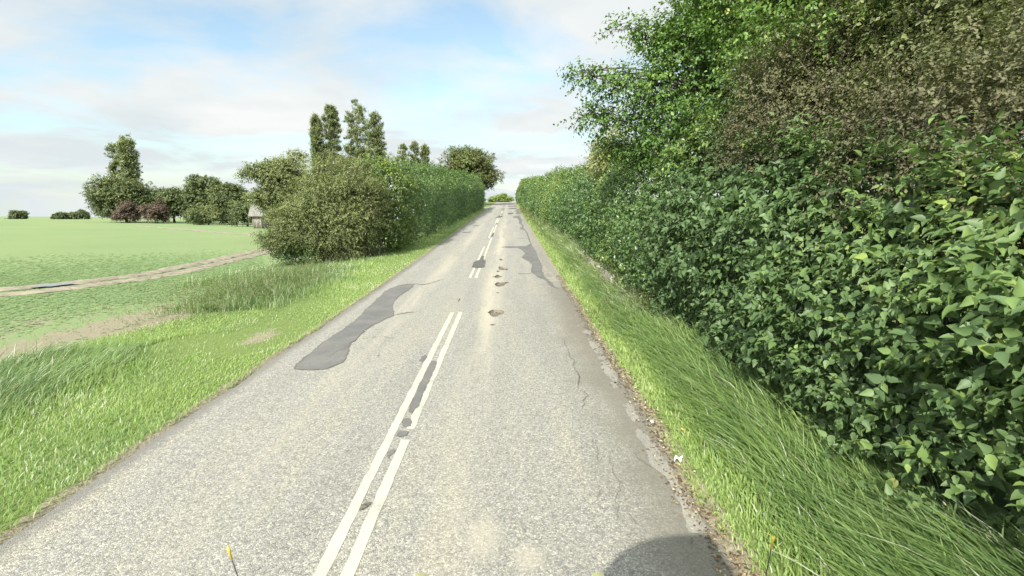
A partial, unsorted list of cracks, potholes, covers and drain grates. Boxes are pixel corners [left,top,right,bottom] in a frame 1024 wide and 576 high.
crack [563,339,589,407]
crack [591,436,635,521]
